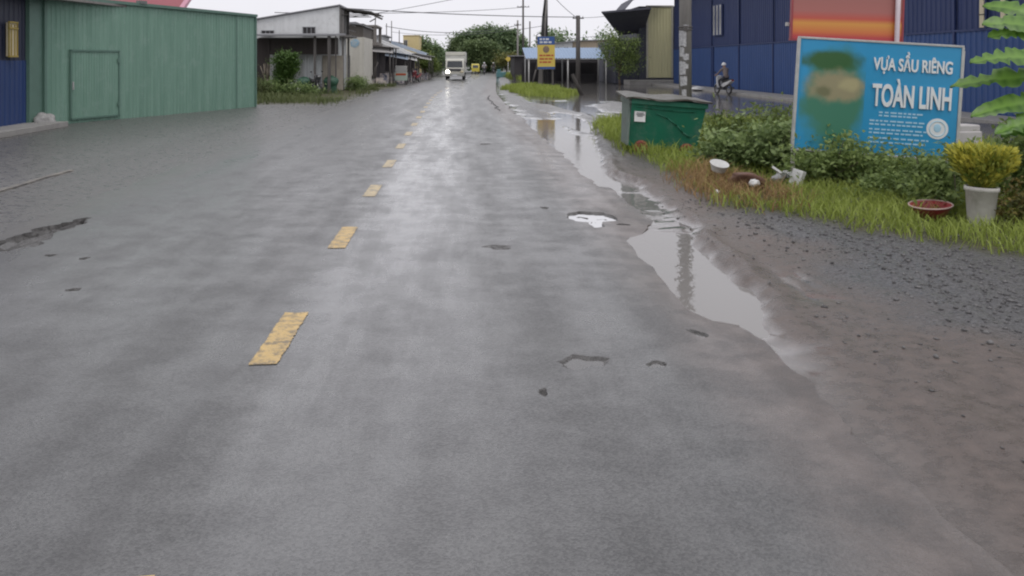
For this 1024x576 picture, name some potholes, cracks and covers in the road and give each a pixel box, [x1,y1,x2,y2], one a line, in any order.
pothole [567,211,618,228]
pothole [557,354,610,370]
pothole [0,217,89,252]
